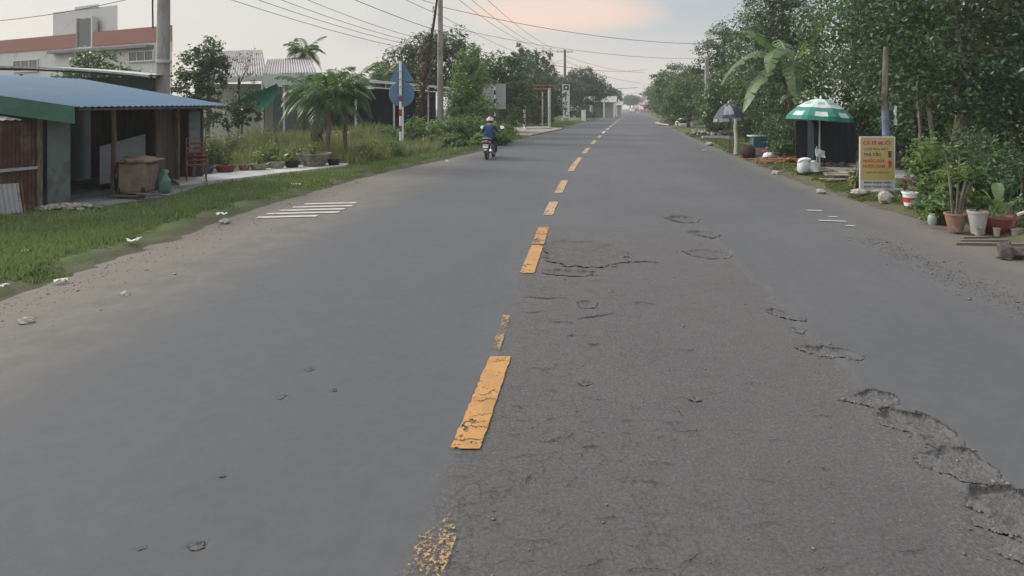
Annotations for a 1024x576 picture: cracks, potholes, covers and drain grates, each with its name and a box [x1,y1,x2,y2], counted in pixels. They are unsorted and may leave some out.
crack [521,296,611,345]
pothole [915,446,1009,491]
pothole [795,345,868,361]
pothole [876,407,966,450]
pothole [684,249,733,259]
pothole [765,308,807,322]
crack [507,405,600,482]
pothole [687,230,721,238]
pothole [665,215,701,223]
pothole [835,389,900,411]
pothole [963,483,1024,538]
